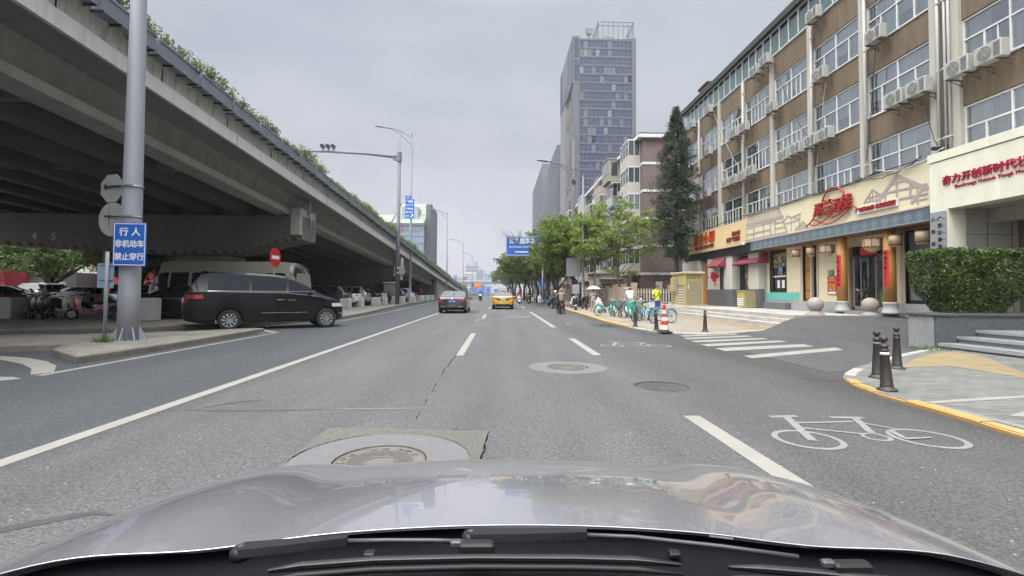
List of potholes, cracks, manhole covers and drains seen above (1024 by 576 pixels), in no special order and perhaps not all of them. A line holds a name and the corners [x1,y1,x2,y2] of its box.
manhole cover [634,381,690,392]
manhole cover [284,434,469,467]
manhole cover [529,362,607,374]
